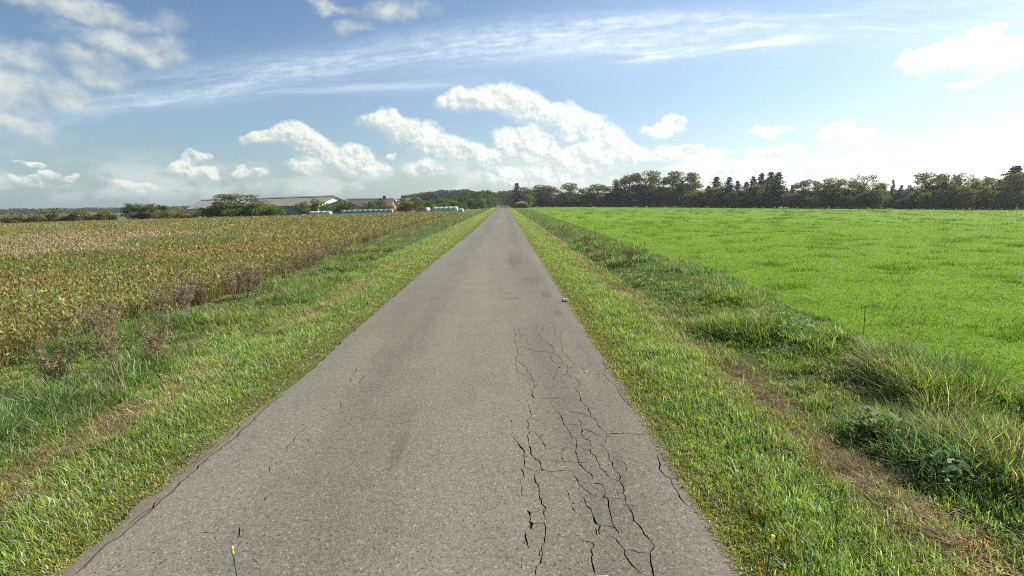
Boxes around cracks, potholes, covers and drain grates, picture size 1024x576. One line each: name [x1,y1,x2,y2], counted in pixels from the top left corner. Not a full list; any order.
crack [511,329,655,576]
